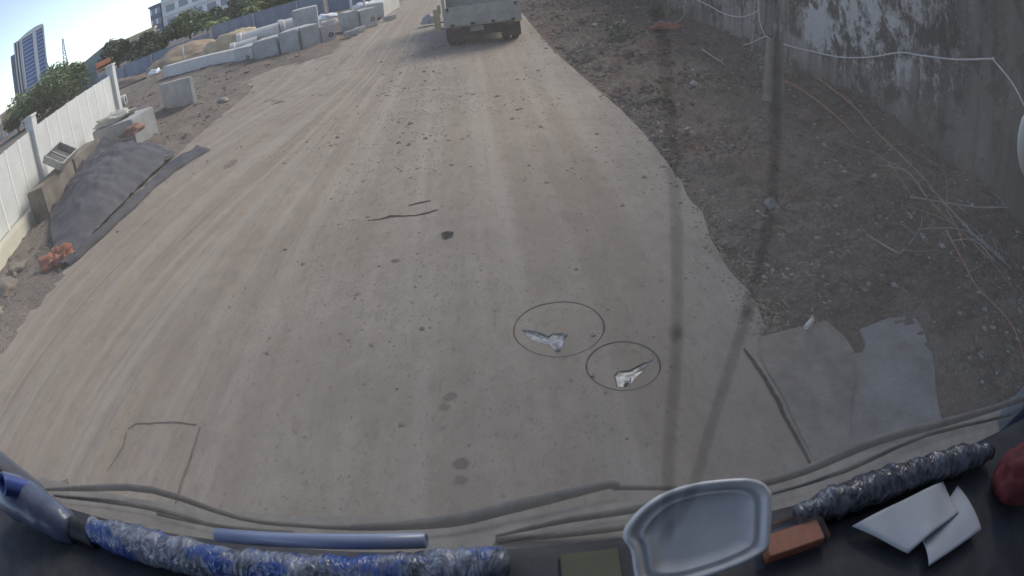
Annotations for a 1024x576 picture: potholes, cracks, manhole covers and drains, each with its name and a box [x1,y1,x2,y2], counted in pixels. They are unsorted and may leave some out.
crack [743,348,812,464]
crack [367,200,438,221]
